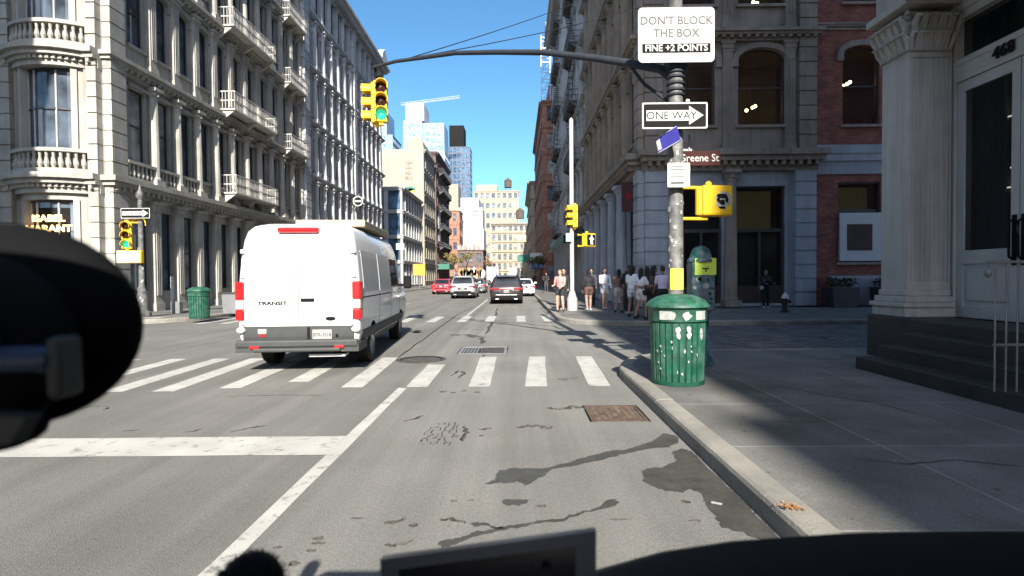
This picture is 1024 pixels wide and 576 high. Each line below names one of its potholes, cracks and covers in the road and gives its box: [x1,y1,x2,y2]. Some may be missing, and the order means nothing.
crack [516,405,585,429]
